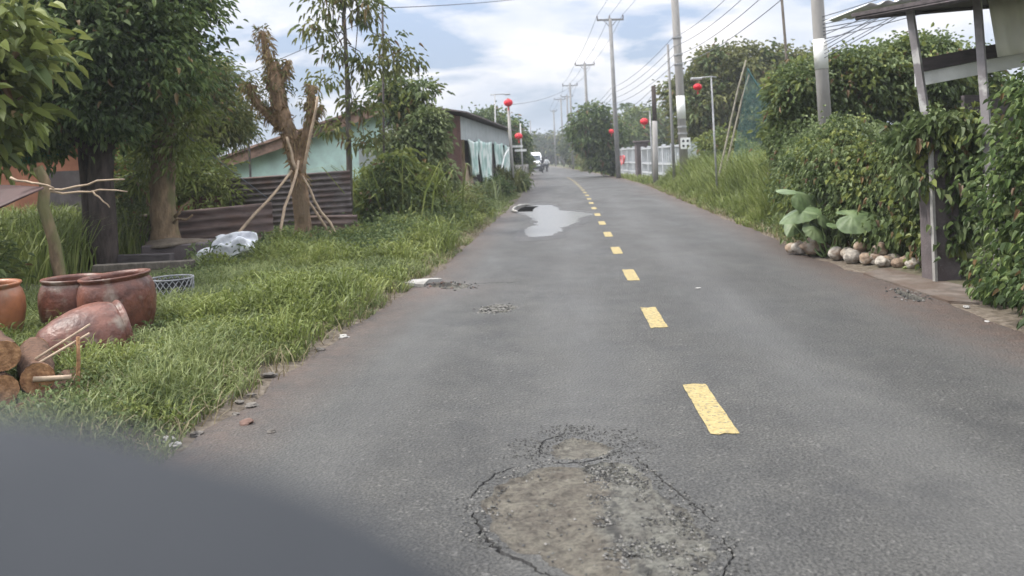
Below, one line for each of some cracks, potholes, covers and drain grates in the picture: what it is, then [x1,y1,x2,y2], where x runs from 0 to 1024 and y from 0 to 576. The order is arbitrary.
pothole [473,303,516,315]
crack [470,466,553,576]
pothole [427,280,479,291]
pothole [456,451,750,576]
pothole [503,423,663,460]
